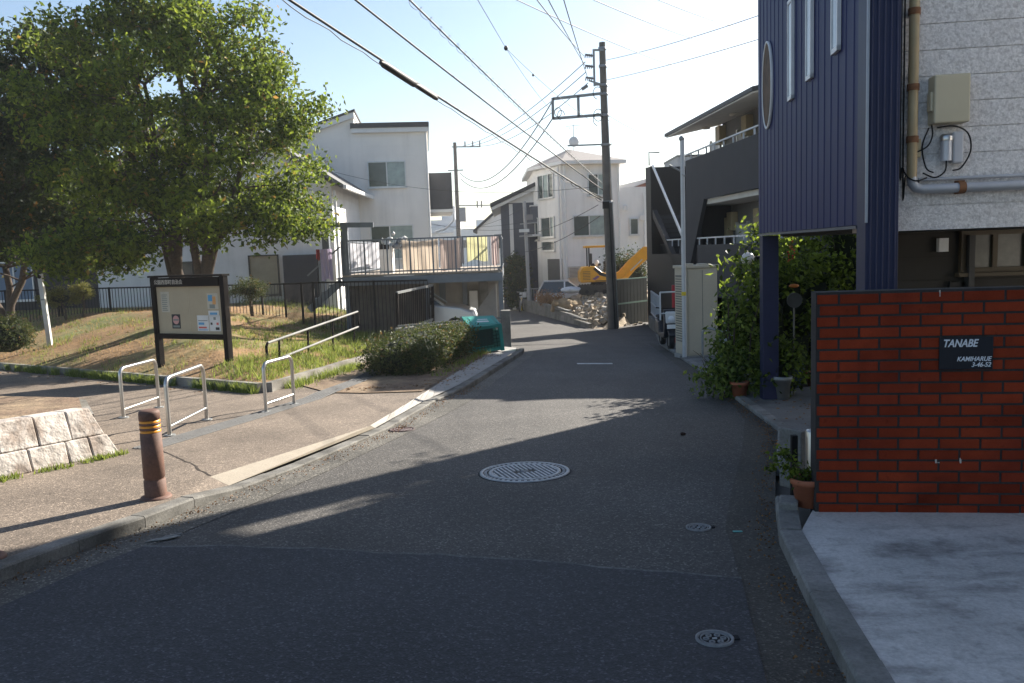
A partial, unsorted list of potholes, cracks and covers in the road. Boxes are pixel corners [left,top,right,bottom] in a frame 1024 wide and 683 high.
manhole cover [695,629,740,648]
crack [163,451,212,476]
manhole cover [686,523,715,532]
manhole cover [478,462,572,483]
